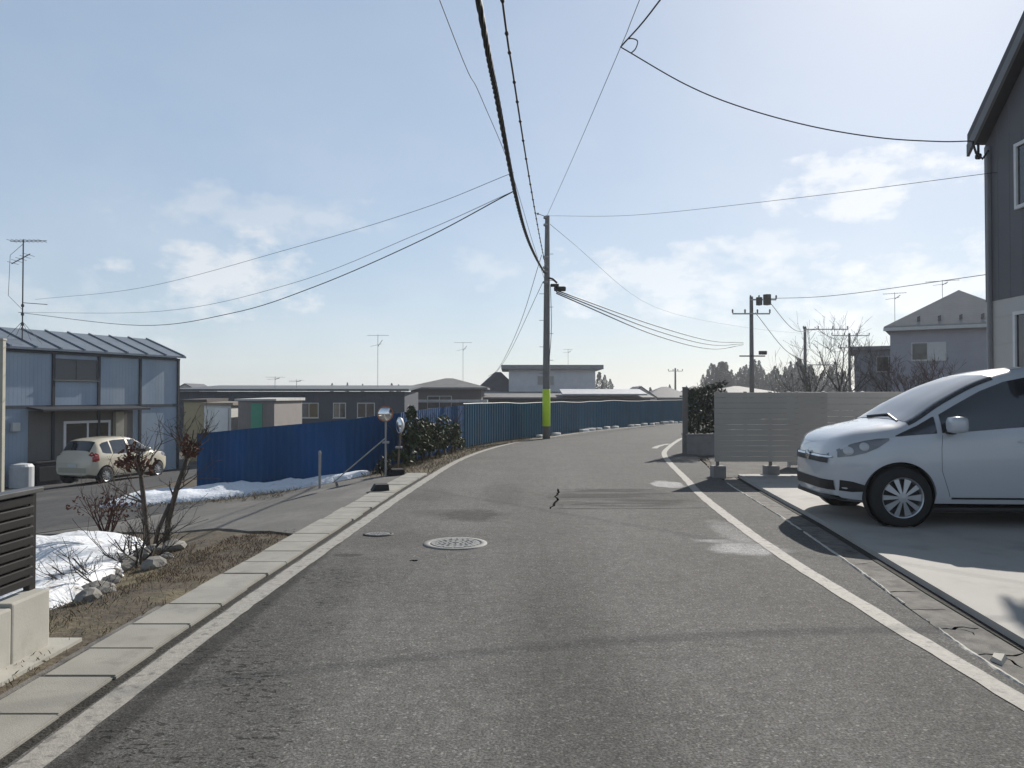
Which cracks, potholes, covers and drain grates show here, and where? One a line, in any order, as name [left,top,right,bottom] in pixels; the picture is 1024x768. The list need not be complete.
manhole cover [423,537,487,550]
